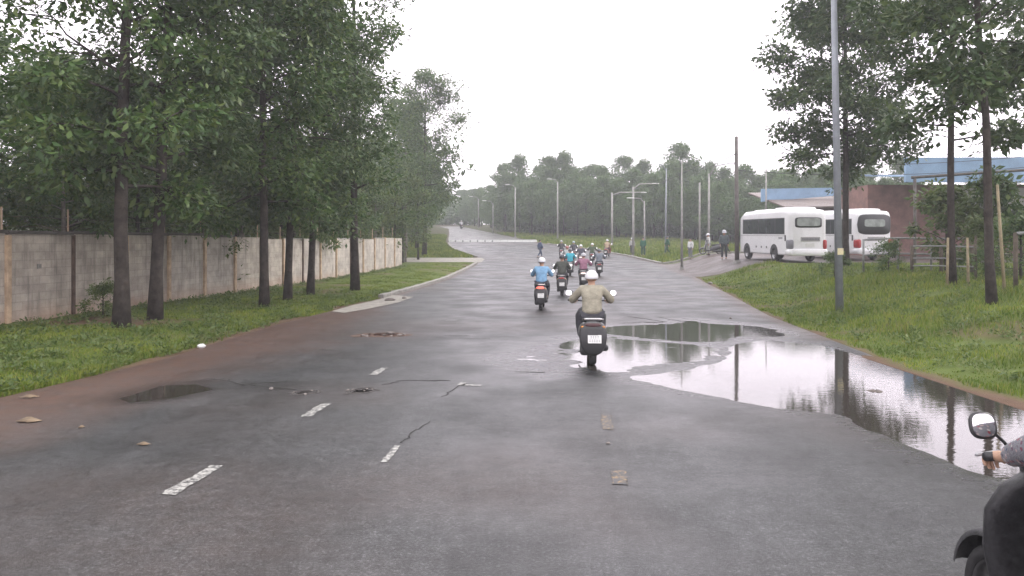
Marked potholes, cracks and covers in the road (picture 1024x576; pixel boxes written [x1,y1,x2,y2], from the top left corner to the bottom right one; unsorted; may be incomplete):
crack [382,380,466,443]
